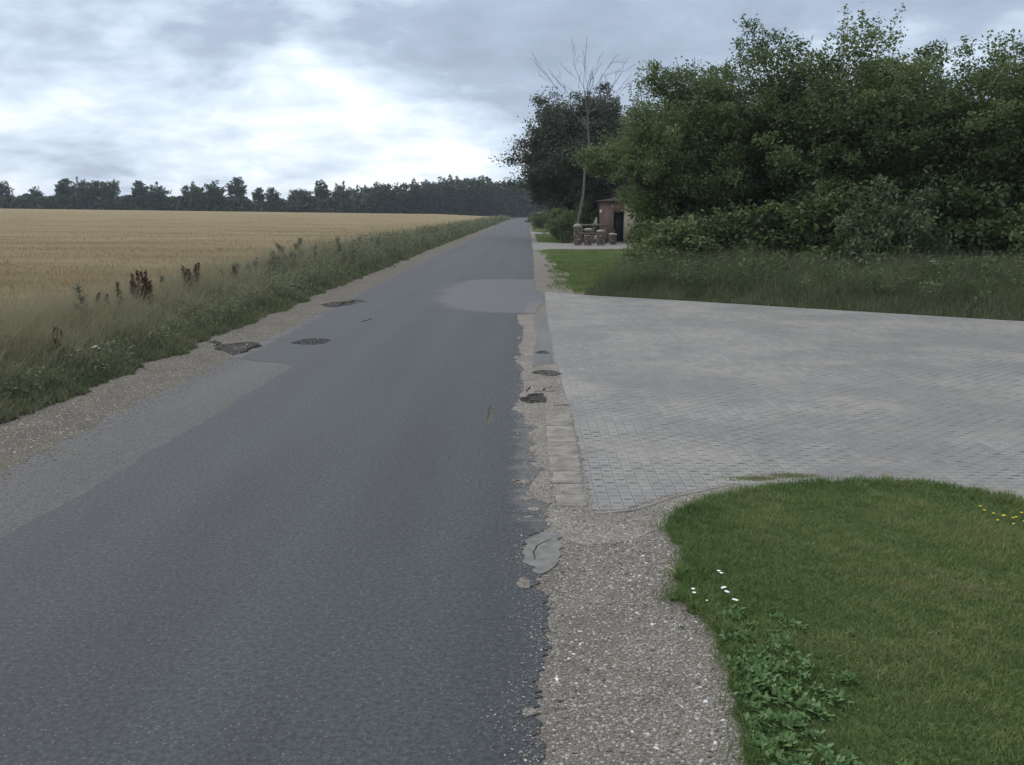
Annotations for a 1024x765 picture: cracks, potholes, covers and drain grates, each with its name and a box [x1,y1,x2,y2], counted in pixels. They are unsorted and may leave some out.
pothole [320,299,366,307]
pothole [520,393,547,404]
pothole [215,341,263,355]
